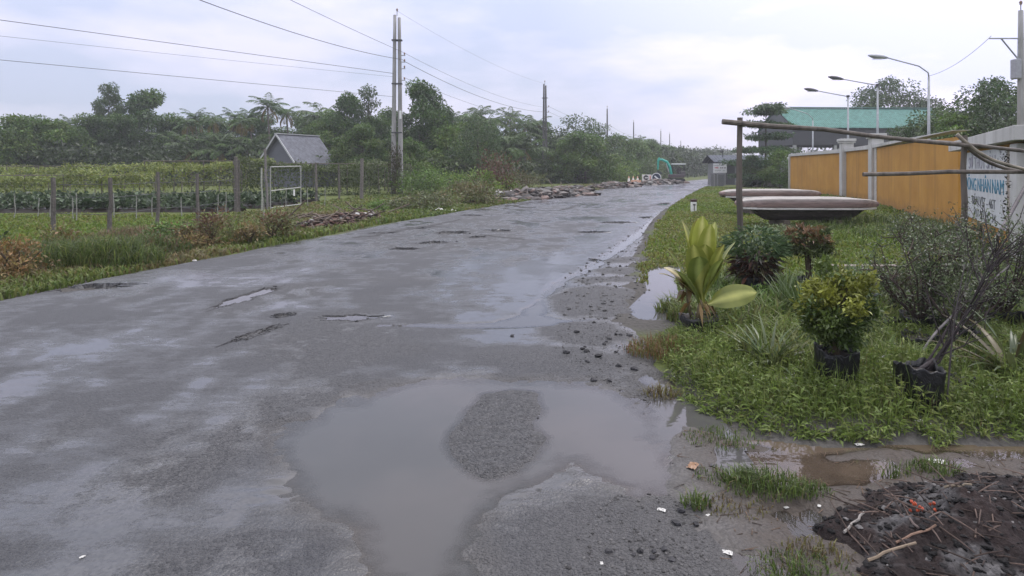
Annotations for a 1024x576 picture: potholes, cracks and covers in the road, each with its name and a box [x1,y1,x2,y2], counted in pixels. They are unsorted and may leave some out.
pothole [201,285,286,312]
pothole [214,323,289,348]
pothole [40,281,149,293]
pothole [314,313,392,322]
